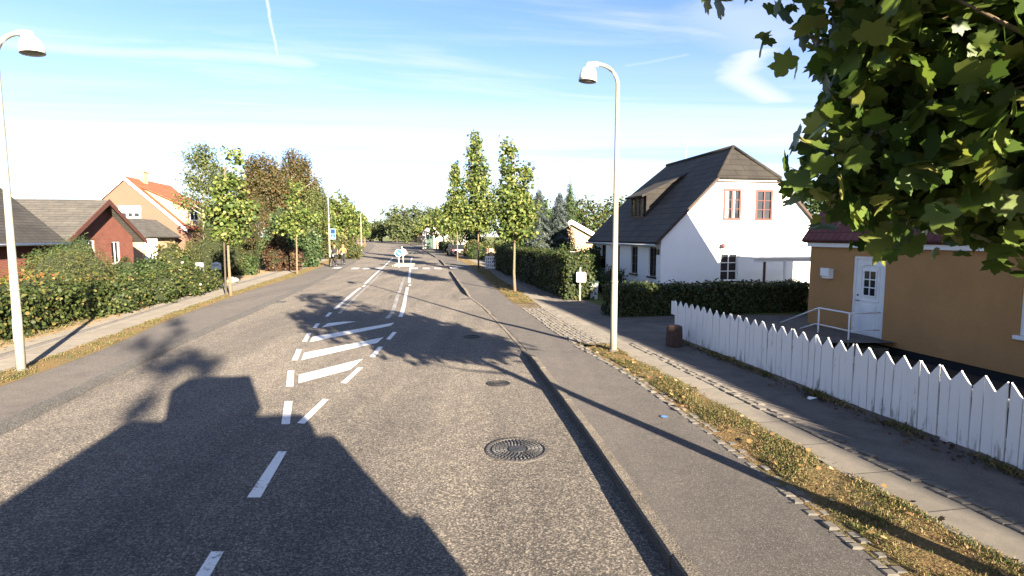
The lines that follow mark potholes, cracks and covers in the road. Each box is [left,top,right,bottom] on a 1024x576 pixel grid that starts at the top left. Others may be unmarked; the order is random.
manhole cover [485,437,549,463]
